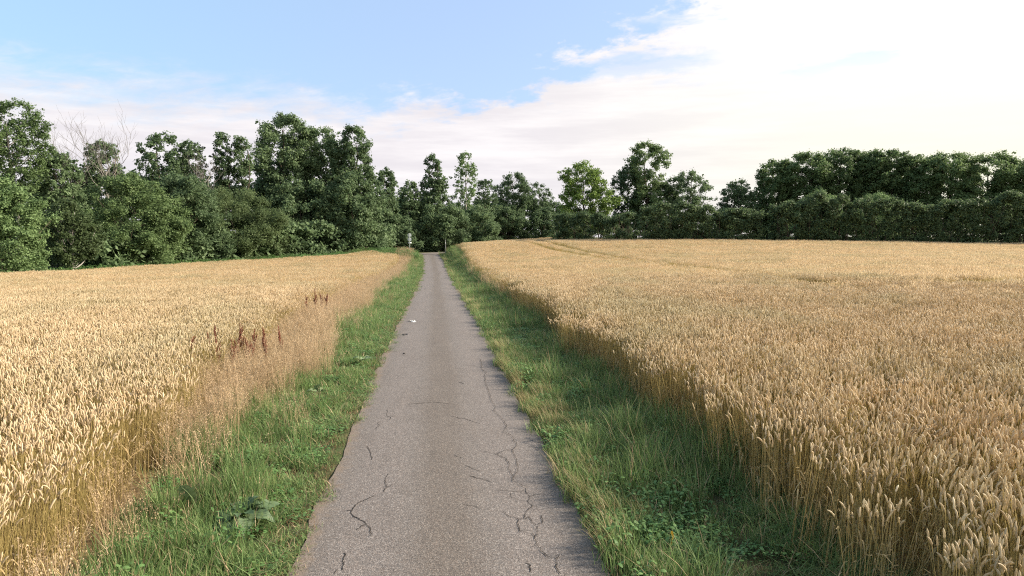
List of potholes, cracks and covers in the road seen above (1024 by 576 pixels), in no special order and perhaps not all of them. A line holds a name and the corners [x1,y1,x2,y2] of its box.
crack [480,359,561,574]
crack [347,477,392,534]
